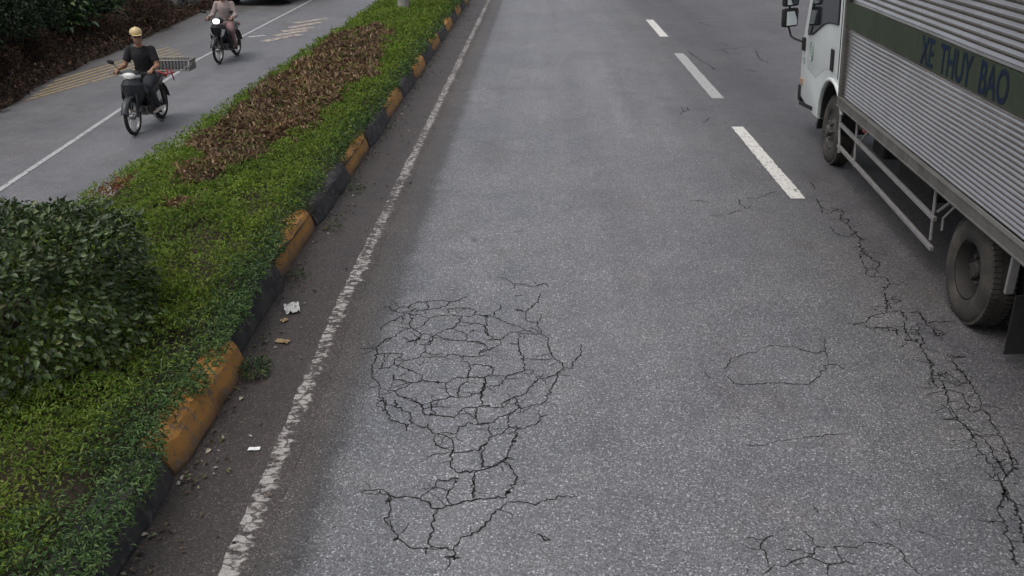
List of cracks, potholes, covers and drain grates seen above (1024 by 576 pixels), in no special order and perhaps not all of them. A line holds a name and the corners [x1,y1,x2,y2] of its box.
crack [704,340,846,385]
crack [745,505,931,575]
crack [811,183,1024,565]
